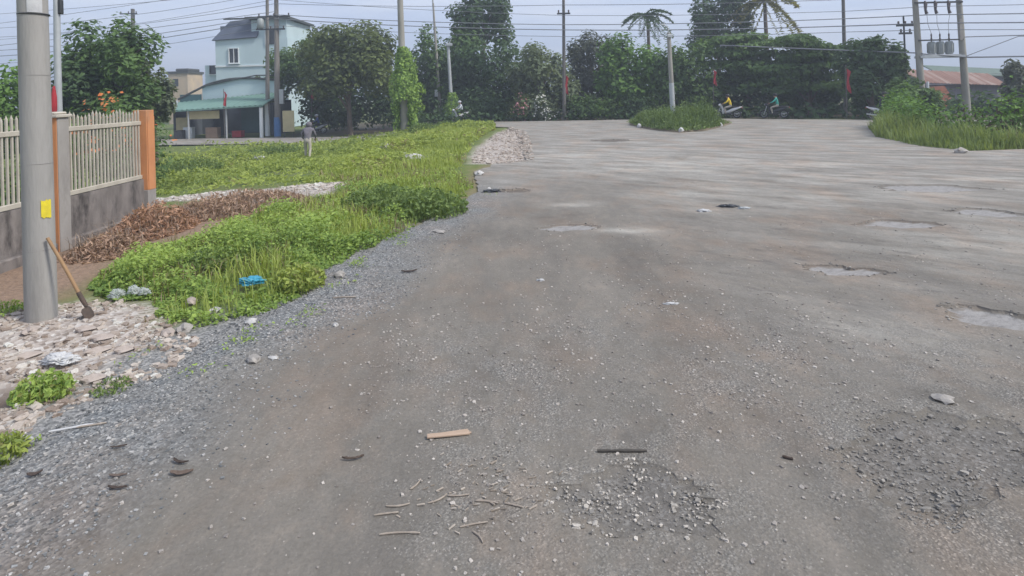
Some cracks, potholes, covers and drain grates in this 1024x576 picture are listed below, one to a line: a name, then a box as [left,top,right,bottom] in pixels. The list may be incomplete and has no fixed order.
pothole [934,302,1024,330]
pothole [532,223,601,232]
pothole [873,184,1006,192]
pothole [821,402,1024,533]
pothole [526,457,729,542]
pothole [849,218,951,229]
pothole [943,207,1024,217]
pothole [795,262,897,277]
